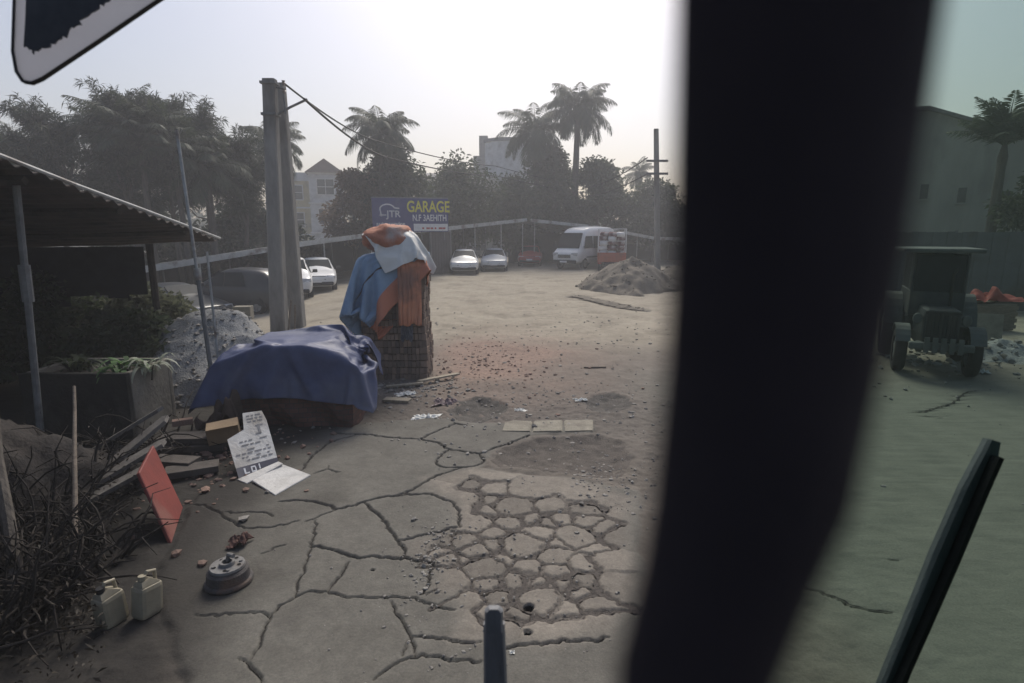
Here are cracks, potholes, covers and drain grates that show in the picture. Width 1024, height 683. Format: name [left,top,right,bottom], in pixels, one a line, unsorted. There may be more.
pothole [446,396,509,423]
crack [911,390,975,418]
crack [214,424,631,683]
pothole [582,393,632,413]
pothole [490,435,632,478]
crack [819,590,890,612]
